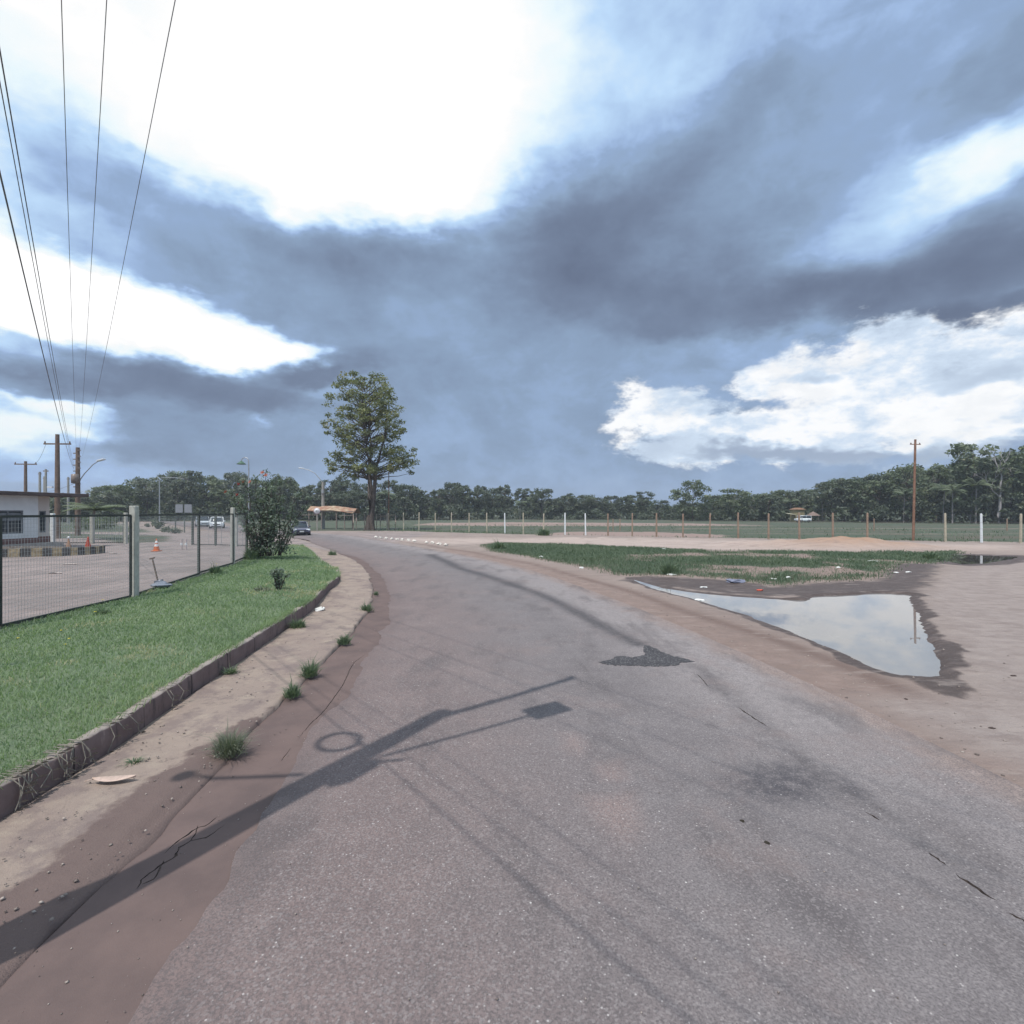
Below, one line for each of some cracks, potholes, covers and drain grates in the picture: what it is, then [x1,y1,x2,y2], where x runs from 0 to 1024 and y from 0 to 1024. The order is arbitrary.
crack [929,853,1024,921]
crack [281,655,364,761]
crack [137,819,223,888]
